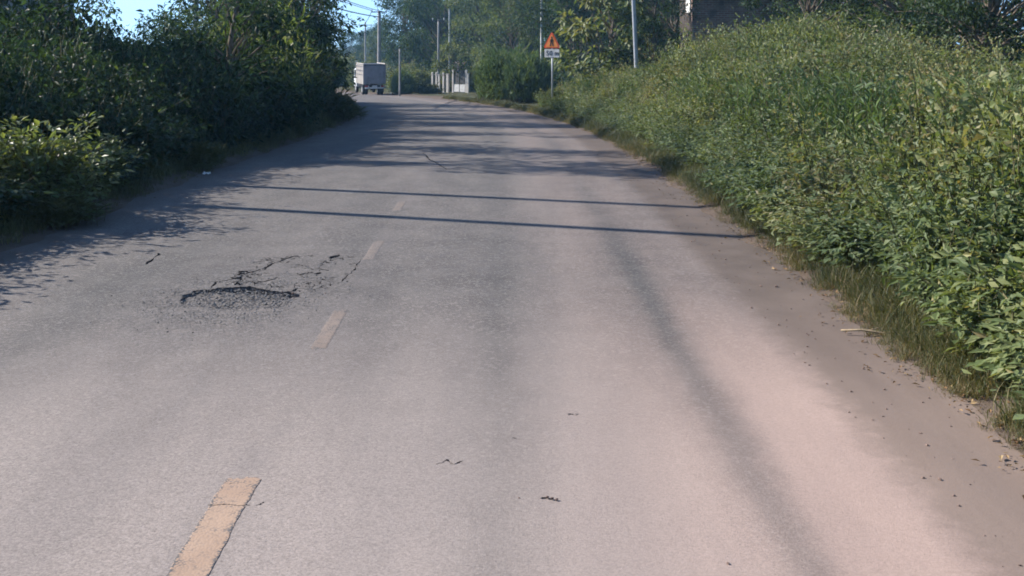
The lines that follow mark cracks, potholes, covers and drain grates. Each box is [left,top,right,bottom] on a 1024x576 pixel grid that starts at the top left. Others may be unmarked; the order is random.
crack [211,254,360,295]
pothole [179,286,300,310]
